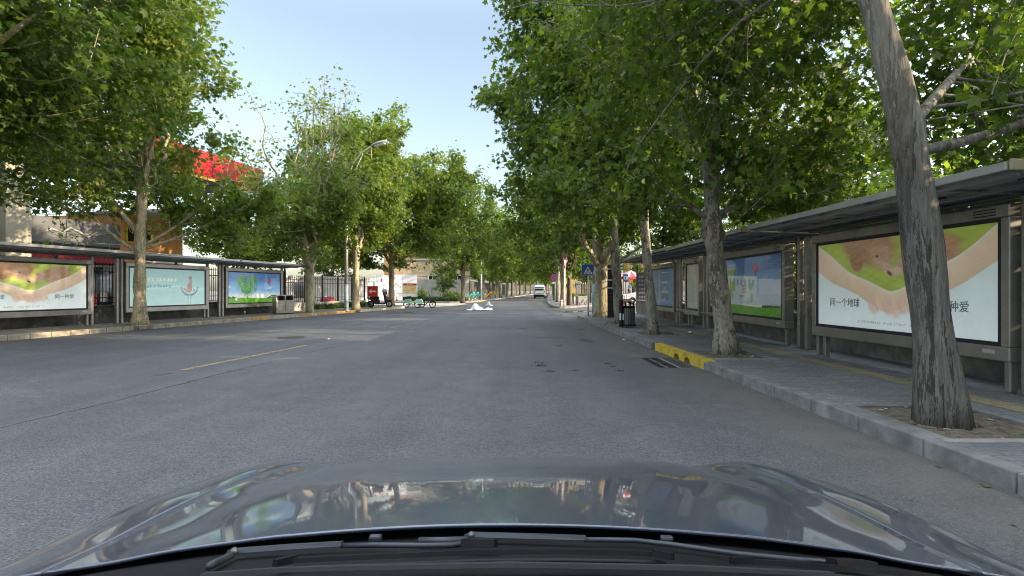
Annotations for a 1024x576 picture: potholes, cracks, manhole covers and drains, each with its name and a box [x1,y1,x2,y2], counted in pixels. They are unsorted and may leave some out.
drain grate [641,358,691,368]
